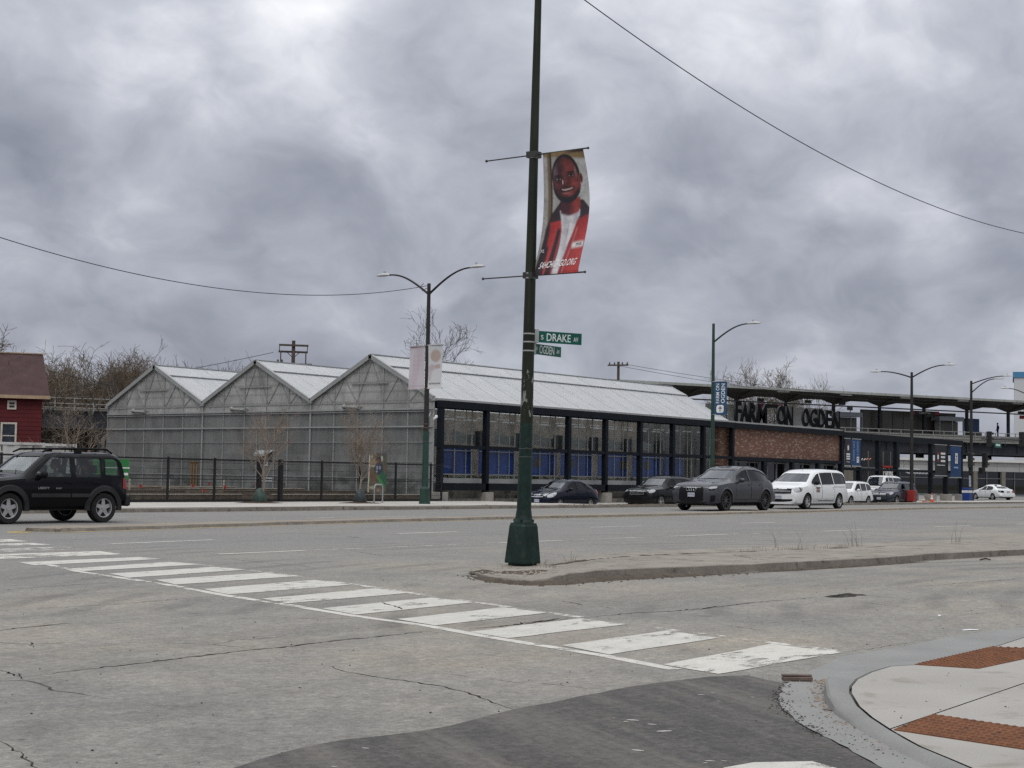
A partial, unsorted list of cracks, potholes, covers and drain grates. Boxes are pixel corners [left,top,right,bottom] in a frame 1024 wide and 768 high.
crack [0,741,37,768]
crack [322,664,512,709]
crack [1,630,445,697]
